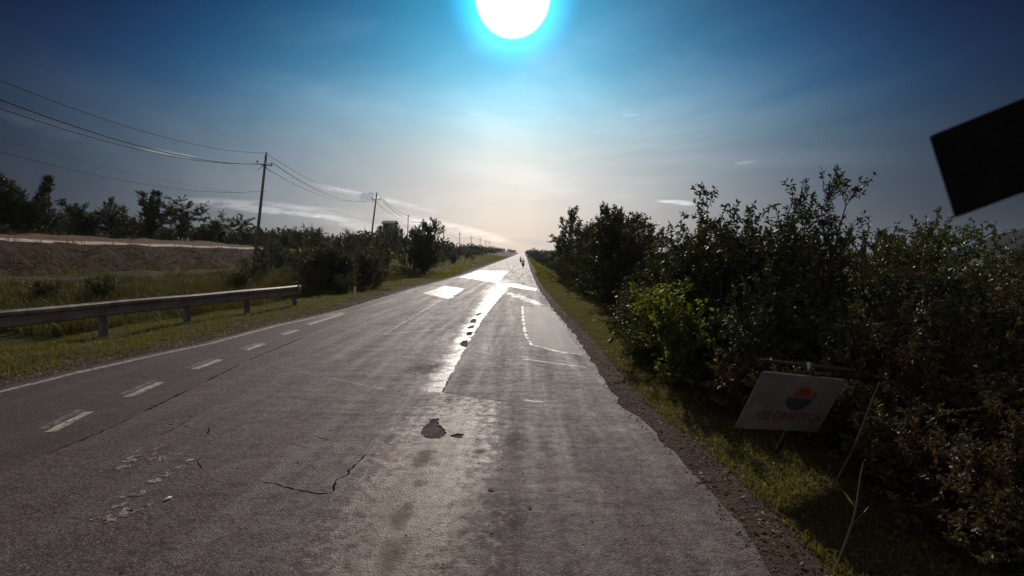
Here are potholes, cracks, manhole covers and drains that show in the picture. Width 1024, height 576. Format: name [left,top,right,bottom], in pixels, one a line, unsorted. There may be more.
pothole [421,418,447,439]
crack [259,436,373,494]
